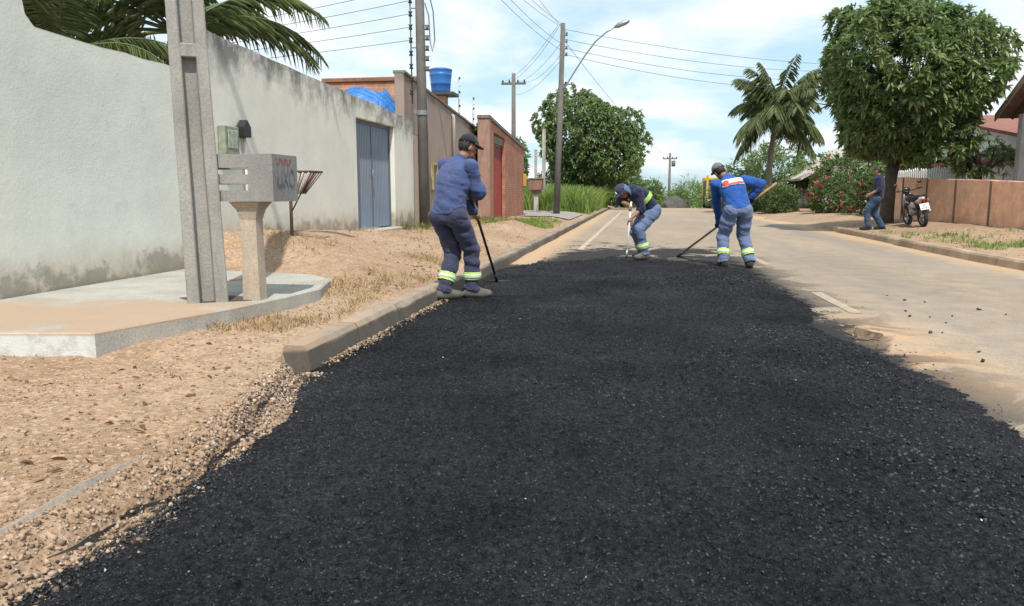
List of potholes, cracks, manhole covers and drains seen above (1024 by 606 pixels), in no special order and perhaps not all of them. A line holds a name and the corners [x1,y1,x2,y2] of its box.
pothole [846,328,883,341]
